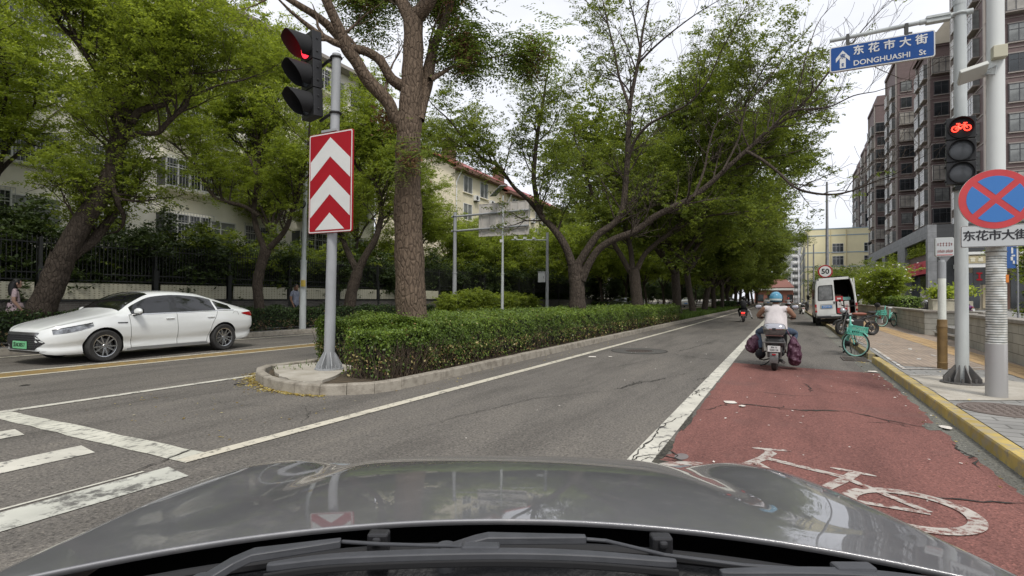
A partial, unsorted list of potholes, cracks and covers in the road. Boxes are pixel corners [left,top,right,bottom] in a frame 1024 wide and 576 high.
crack [952,443,981,469]
manhole cover [956,402,1024,419]
crack [609,341,931,461]
